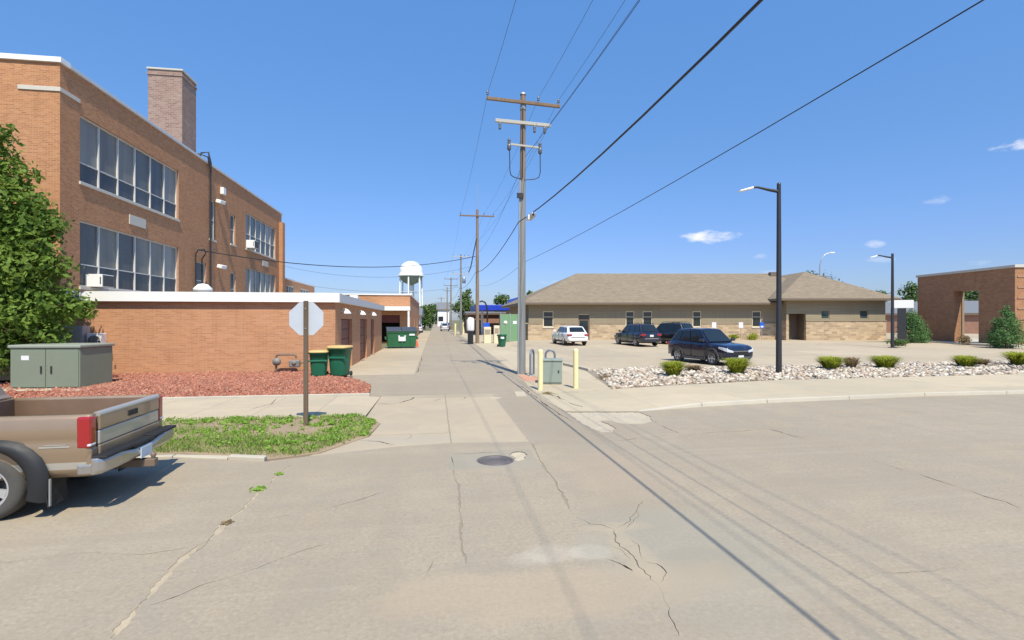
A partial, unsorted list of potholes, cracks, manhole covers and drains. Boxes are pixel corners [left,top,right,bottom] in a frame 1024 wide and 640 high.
crack [587,499,679,634]
crack [451,452,492,563]
manhole cover [477,456,514,466]
crack [149,545,320,606]
